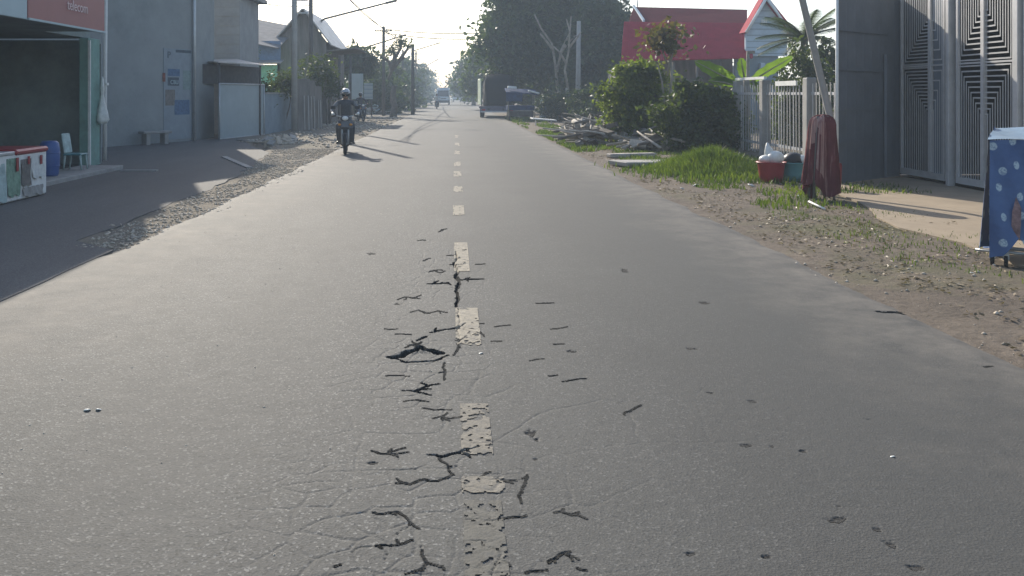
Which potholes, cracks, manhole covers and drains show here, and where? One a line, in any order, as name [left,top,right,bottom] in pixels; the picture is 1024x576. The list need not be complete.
crack [370,447,588,574]
crack [529,326,587,382]
crack [384,255,485,421]
